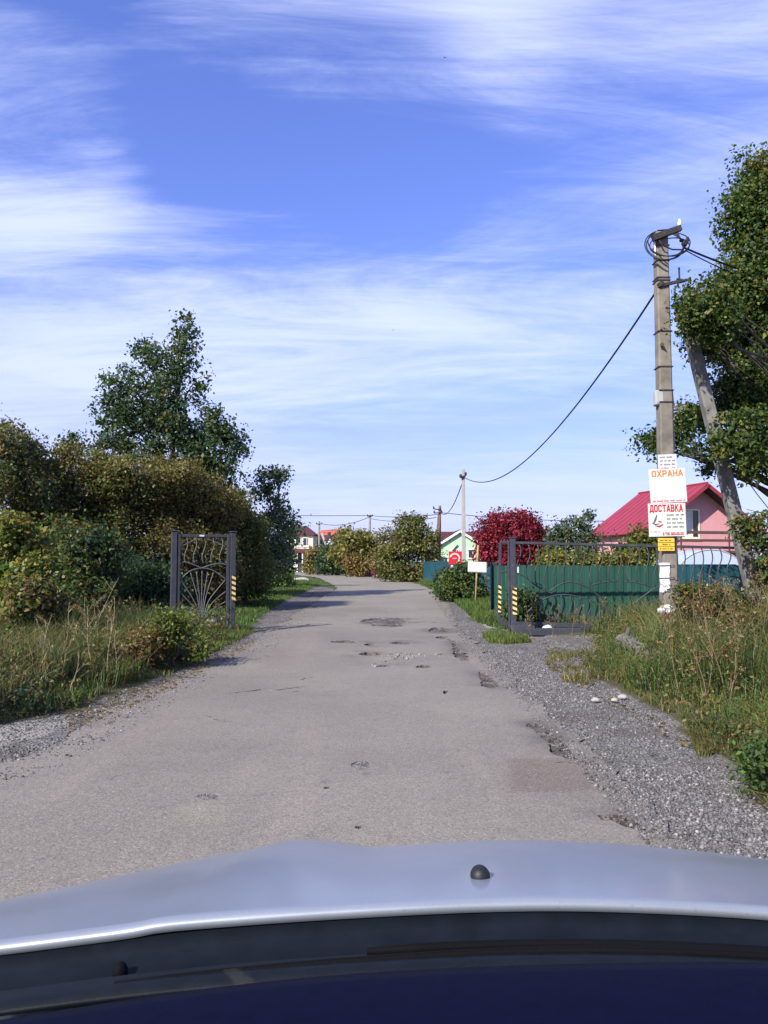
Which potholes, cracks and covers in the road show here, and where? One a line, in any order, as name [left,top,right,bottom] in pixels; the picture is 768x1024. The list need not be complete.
pothole [447,639,469,661]
pothole [351,761,372,770]
pothole [360,618,410,627]
pothole [197,793,219,801]
pothole [478,671,498,688]
crack [227,677,314,694]
pothole [598,815,648,833]
pothole [526,722,578,760]
